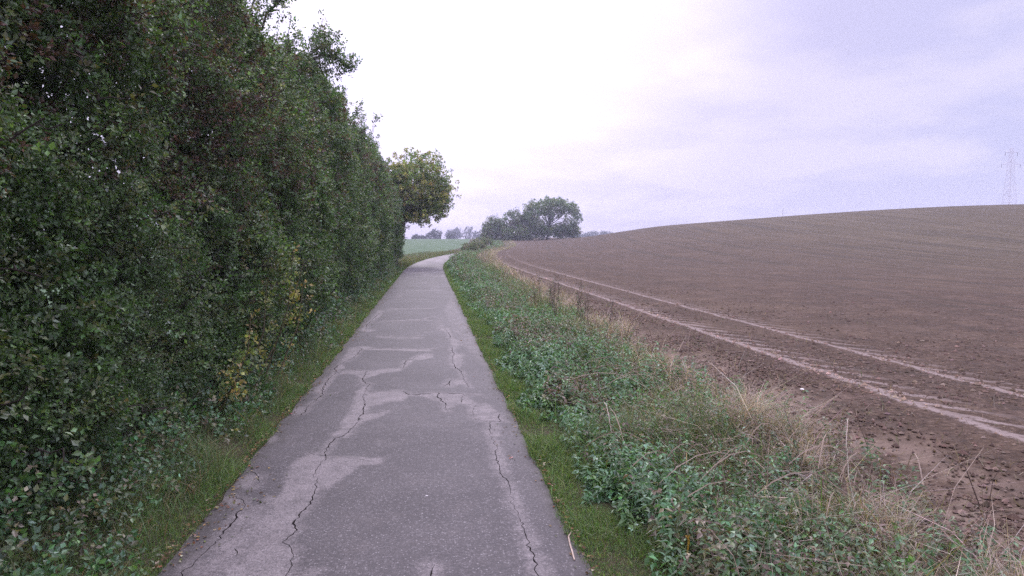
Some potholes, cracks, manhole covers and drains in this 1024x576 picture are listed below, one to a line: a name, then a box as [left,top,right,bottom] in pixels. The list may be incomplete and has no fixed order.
crack [403,320,539,576]
crack [181,497,245,576]
crack [282,363,405,576]
